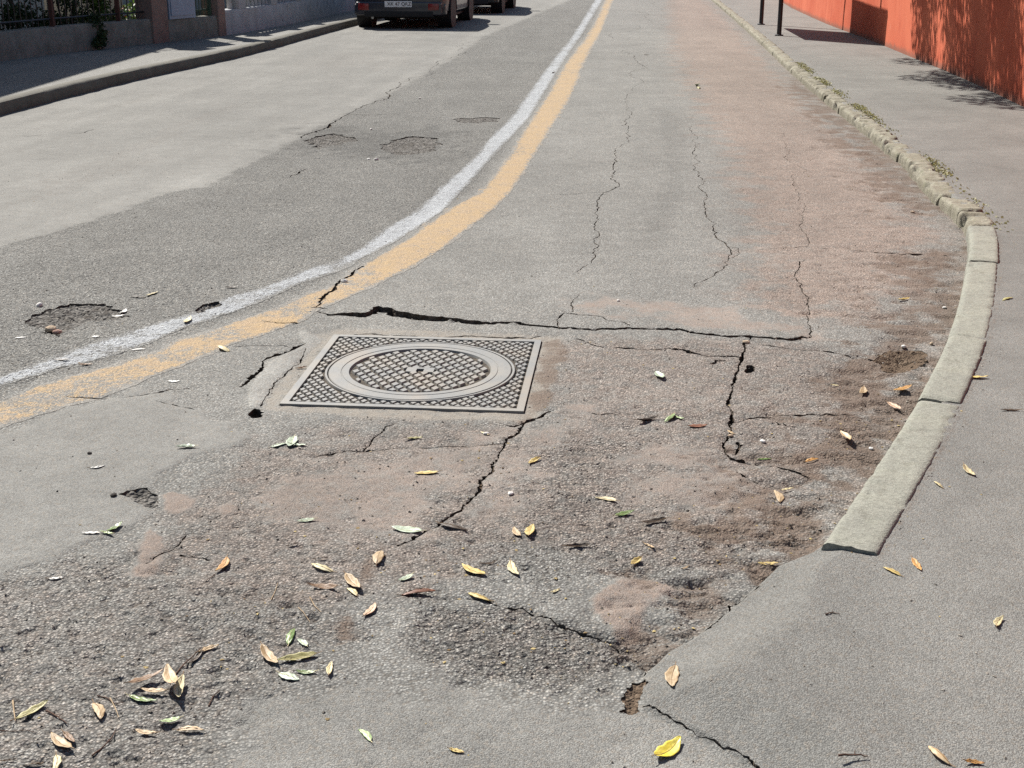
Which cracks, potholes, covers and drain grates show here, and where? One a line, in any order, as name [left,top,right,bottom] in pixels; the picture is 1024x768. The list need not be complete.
crack [436,599,622,655]
crack [642,704,761,768]
manhole cover [280,334,541,414]
pothole [873,350,928,374]
crack [237,343,306,406]
pothole [619,679,648,715]
crack [314,411,551,546]
pothole [119,488,158,509]
crack [562,2,665,273]
crack [316,139,947,482]
pothole [25,304,129,337]
